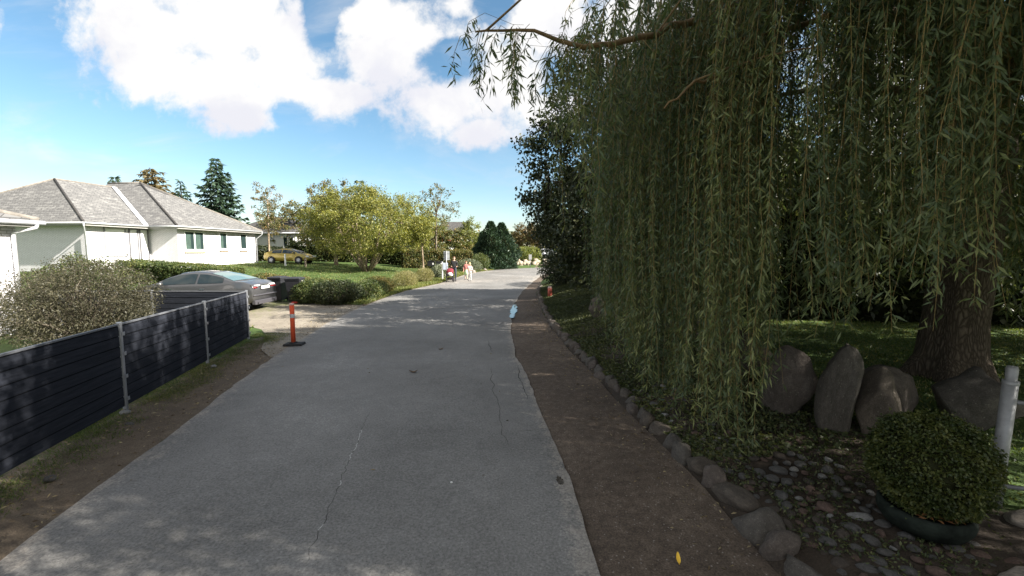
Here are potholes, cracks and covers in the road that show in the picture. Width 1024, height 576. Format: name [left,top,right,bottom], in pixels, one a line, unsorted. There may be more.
crack [309,417,367,559]
